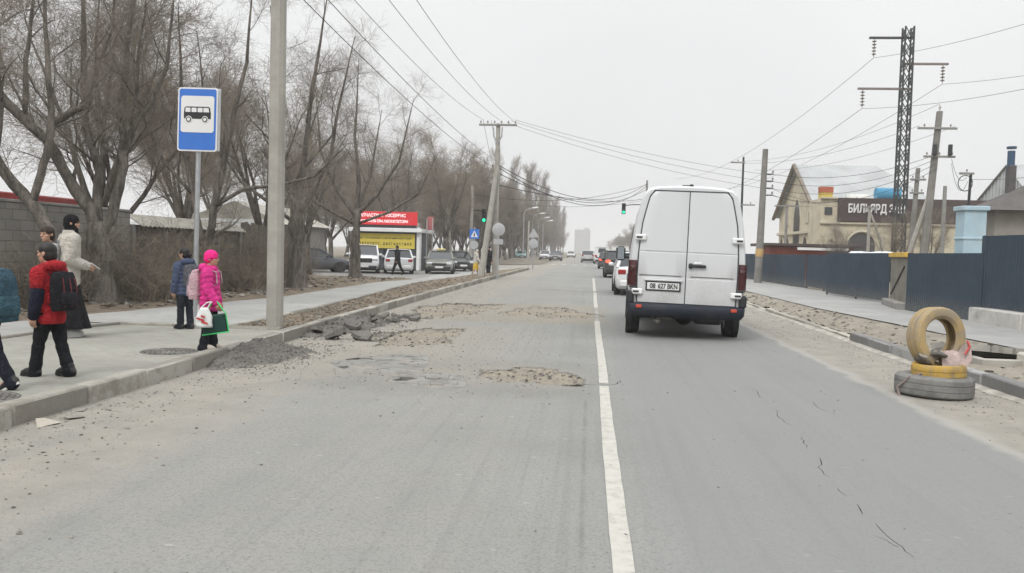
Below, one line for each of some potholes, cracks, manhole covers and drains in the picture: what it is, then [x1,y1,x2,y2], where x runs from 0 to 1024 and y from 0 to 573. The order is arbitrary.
crack [756,390,912,556]
manhole cover [0,390,30,403]
pothole [354,327,466,347]
manhole cover [134,348,199,356]
pothole [410,303,506,319]
pothole [478,366,587,387]
pothole [498,306,605,319]
